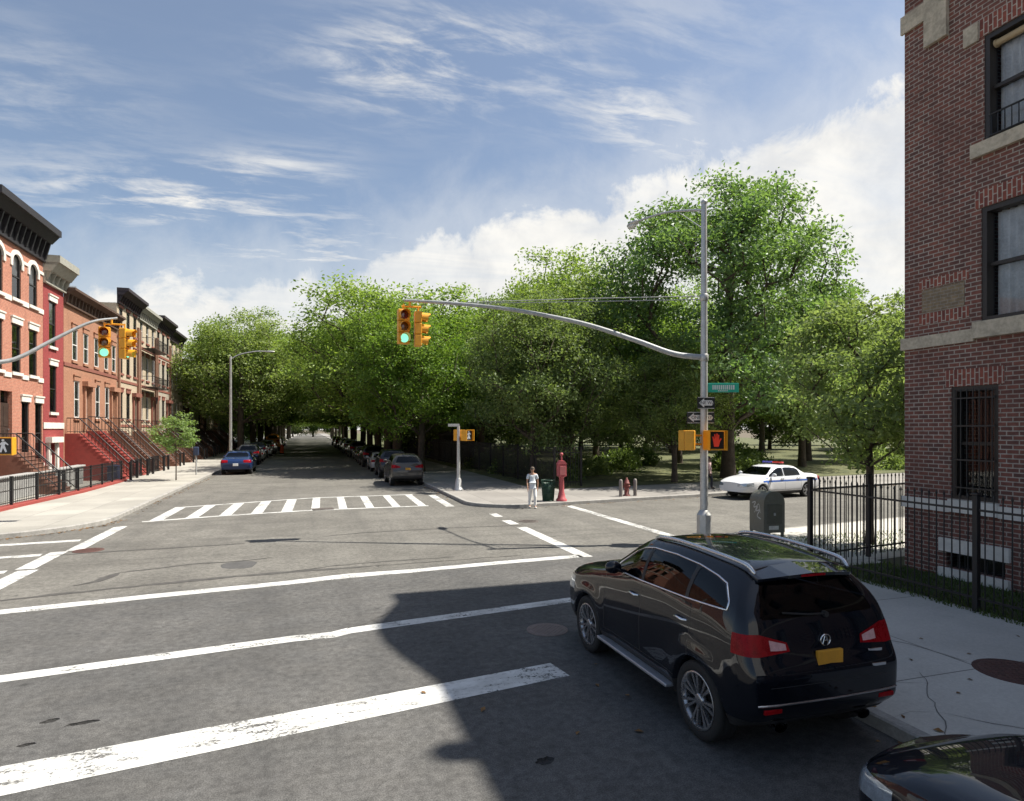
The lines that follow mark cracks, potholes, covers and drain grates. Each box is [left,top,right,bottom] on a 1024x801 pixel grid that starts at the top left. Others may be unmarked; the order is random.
crack [897,673,1020,735]
manhole cover [971,658,1024,685]
manhole cover [527,623,568,636]
